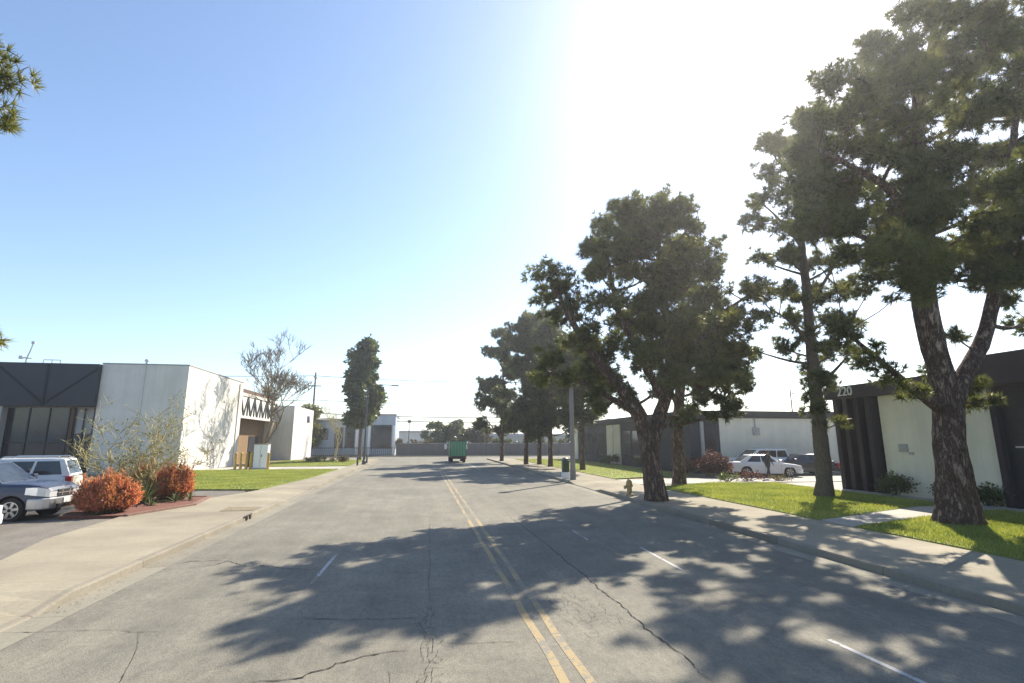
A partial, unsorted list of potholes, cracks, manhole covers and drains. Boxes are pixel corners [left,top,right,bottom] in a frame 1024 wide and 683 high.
crack [251,650,403,683]
crack [508,515,715,683]
crack [307,534,510,683]
